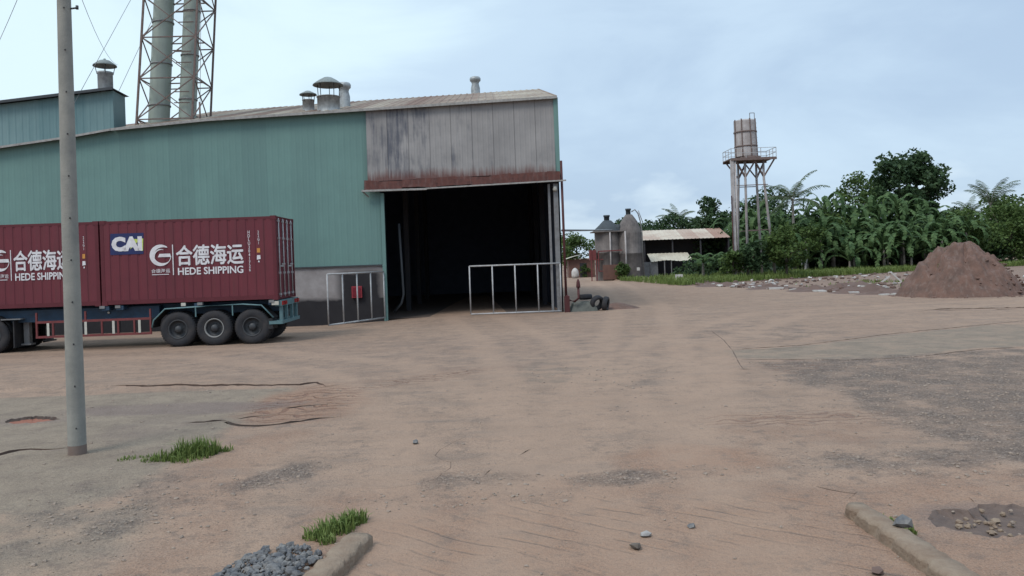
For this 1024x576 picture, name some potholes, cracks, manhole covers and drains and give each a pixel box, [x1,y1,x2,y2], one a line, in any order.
pothole [0,414,67,427]
crack [0,445,68,458]
crack [103,380,344,431]
pothole [899,497,1024,549]
crack [707,307,1024,369]
crack [360,436,530,494]
